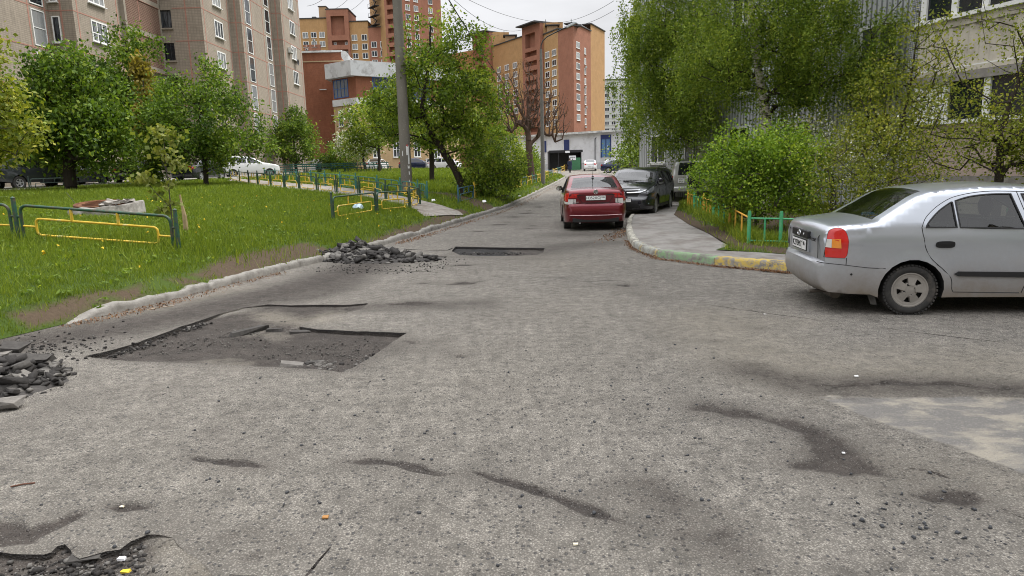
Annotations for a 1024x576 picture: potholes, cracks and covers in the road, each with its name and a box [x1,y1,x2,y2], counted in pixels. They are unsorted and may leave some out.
pothole [452,247,544,256]
crack [305,547,331,576]
pothole [87,303,406,372]
pothole [0,534,212,576]
